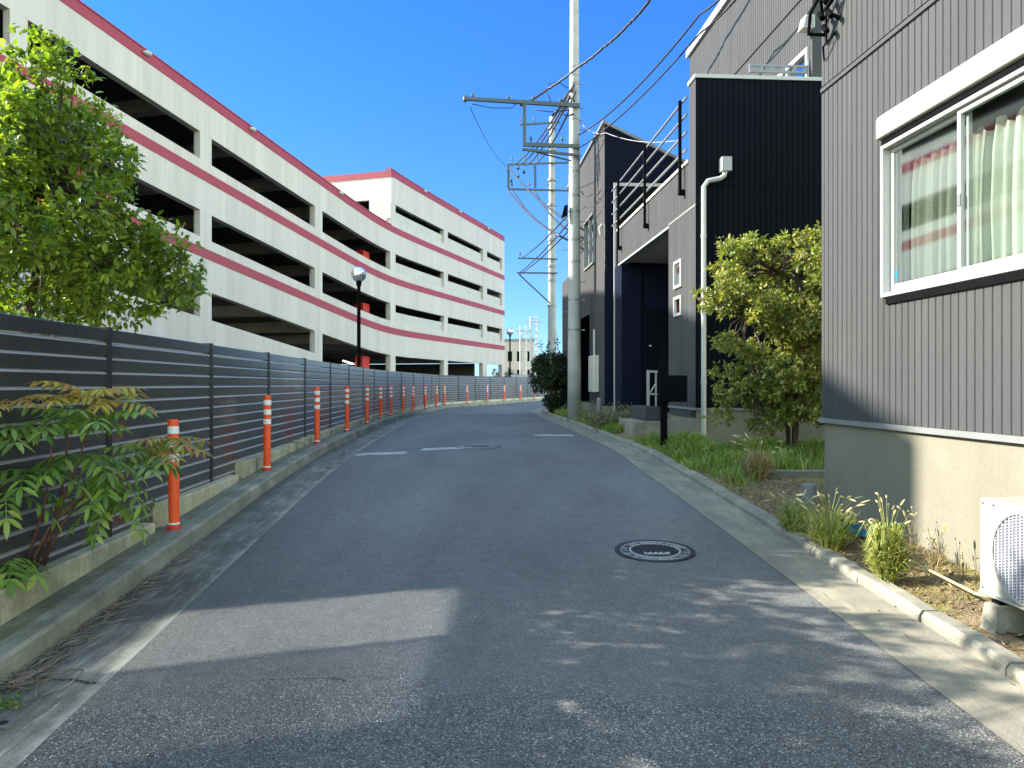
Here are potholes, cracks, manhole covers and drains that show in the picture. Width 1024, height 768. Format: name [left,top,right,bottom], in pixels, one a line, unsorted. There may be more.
manhole cover [615,540,696,563]
